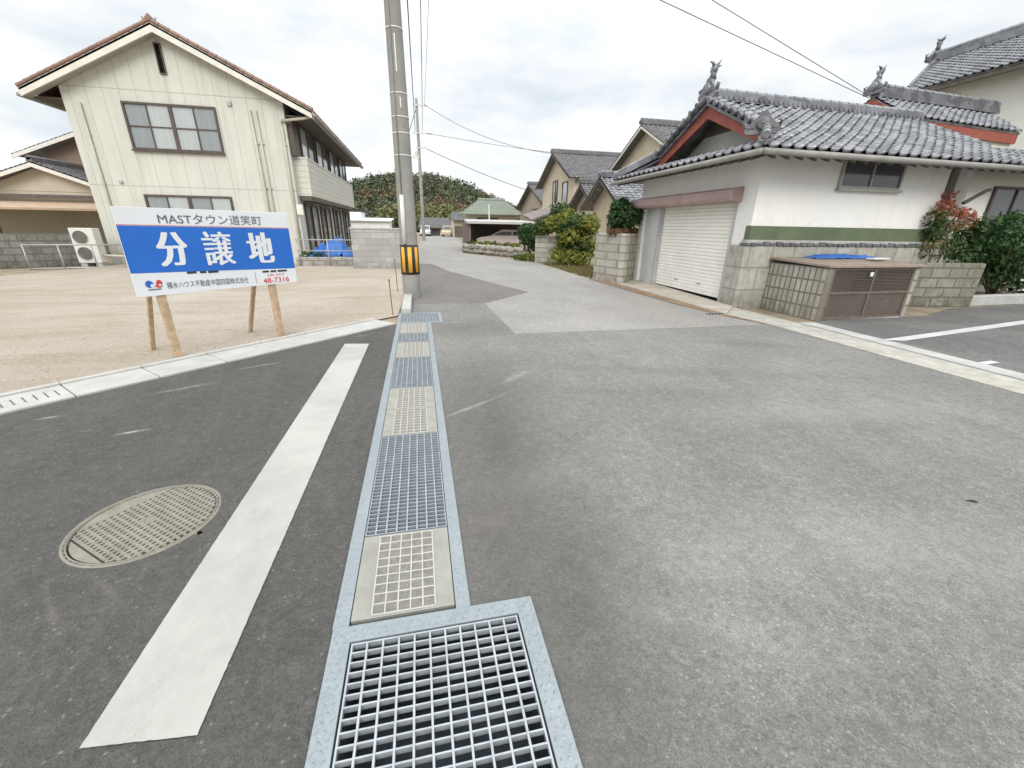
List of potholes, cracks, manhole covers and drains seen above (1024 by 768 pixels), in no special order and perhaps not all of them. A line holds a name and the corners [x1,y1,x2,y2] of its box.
drain grate [304,596,583,768]
manhole cover [58,484,222,568]
